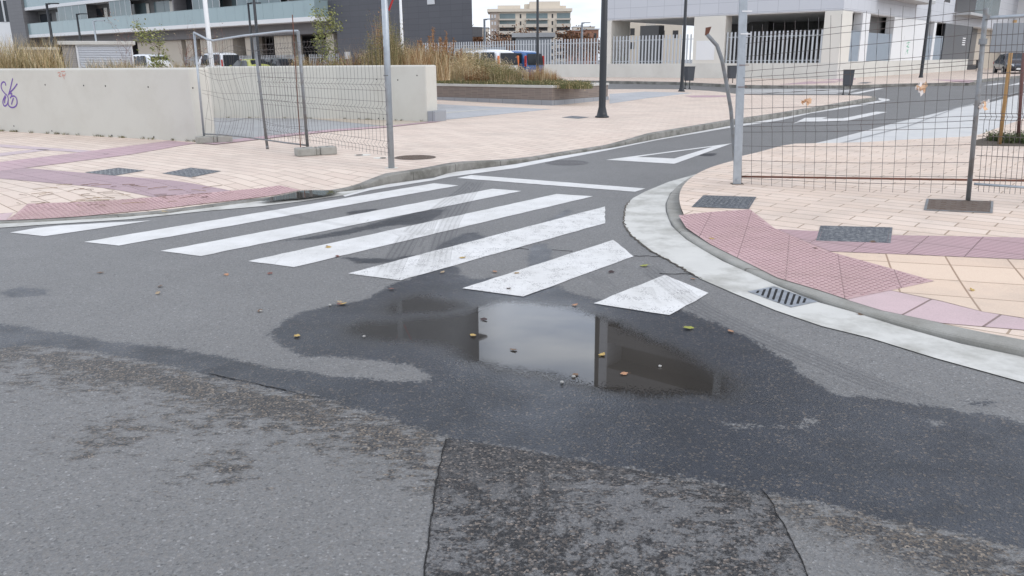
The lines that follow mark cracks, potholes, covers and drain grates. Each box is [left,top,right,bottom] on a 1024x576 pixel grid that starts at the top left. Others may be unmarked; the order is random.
utility cover [692,195,756,209]
drain grate [748,286,818,307]
crack [762,490,808,576]
utility cover [816,225,893,243]
utility cover [164,168,219,177]
